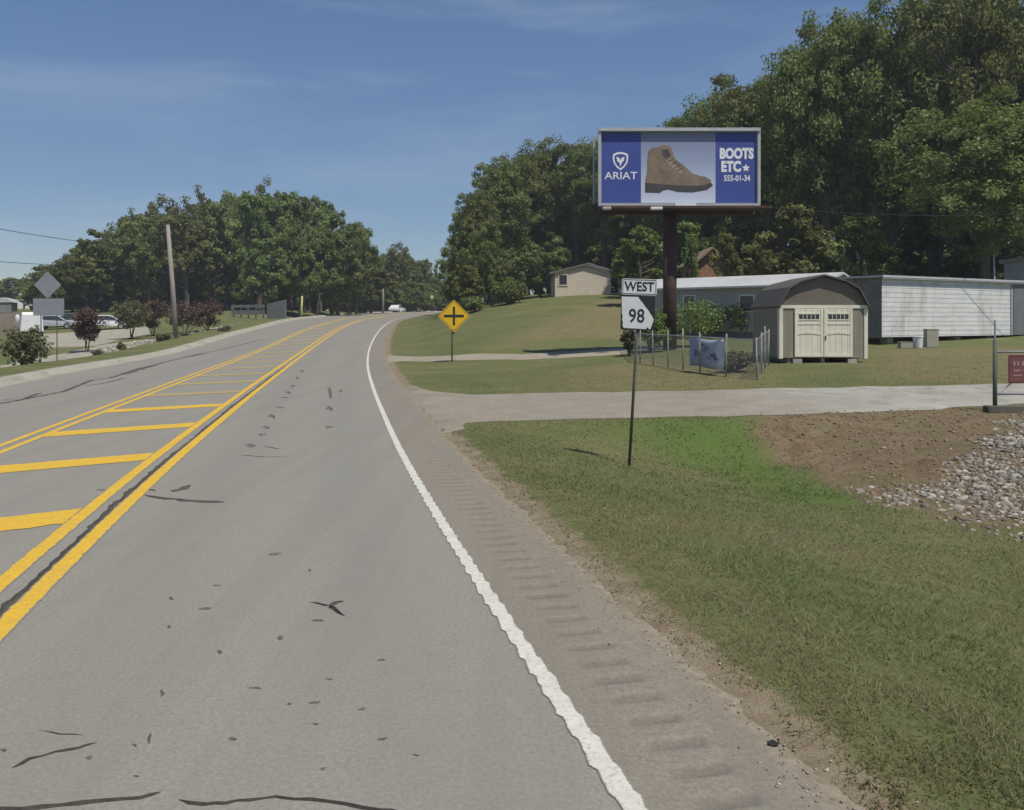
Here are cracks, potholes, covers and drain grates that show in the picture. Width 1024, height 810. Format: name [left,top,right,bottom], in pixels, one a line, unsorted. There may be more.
crack [0,792,160,810]
crack [311,600,345,616]
crack [179,795,396,810]
crack [145,485,223,503]
